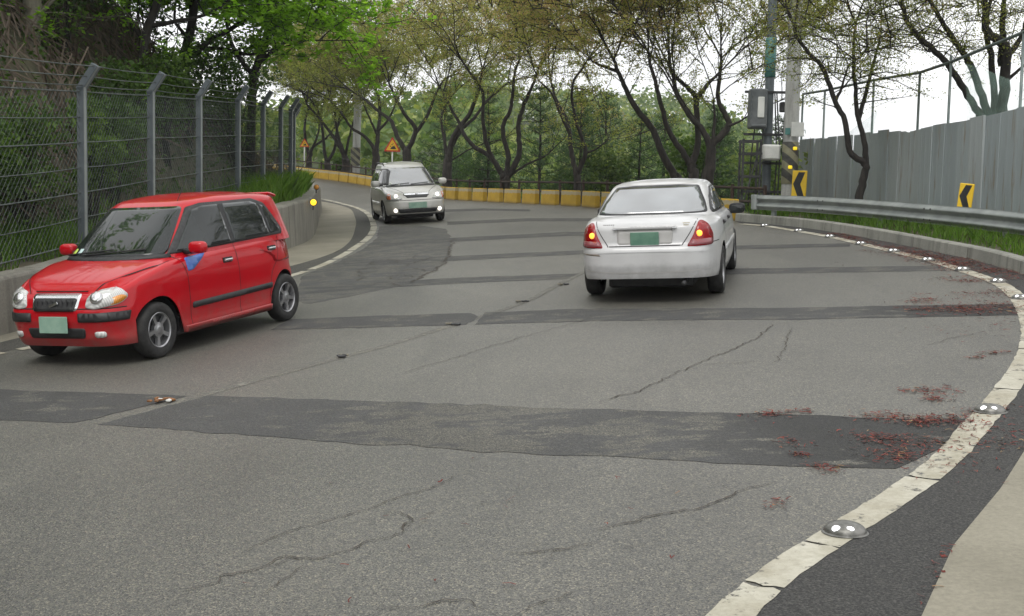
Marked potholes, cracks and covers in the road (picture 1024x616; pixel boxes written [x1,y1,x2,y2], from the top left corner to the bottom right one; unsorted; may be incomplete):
crack [184,477,452,595]
crack [605,325,790,400]
crack [510,482,771,558]
